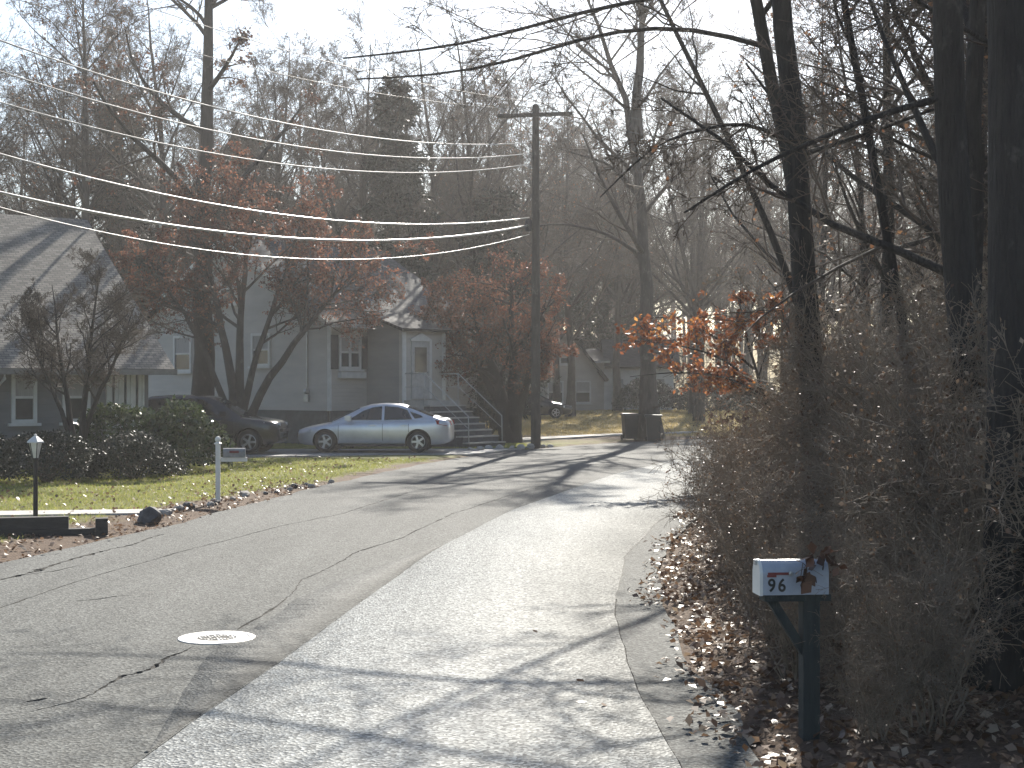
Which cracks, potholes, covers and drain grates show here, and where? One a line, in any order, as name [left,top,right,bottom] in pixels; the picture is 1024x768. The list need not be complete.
crack [237,483,550,630]
crack [0,493,406,608]
crack [27,648,190,710]
manhole cover [178,631,255,645]
